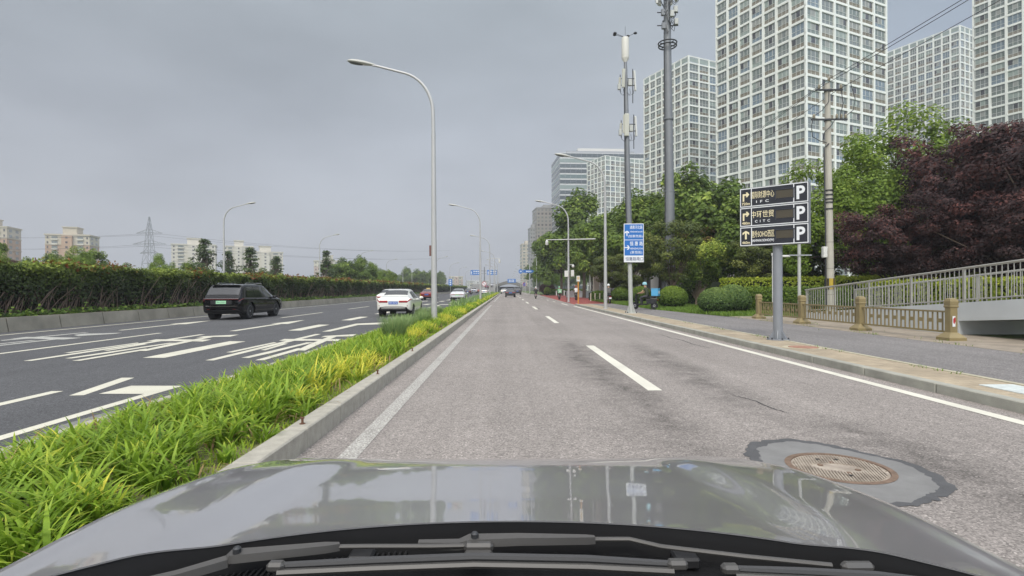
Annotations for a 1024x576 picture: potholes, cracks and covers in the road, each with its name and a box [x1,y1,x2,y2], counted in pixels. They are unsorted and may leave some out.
manhole cover [743,438,957,507]
